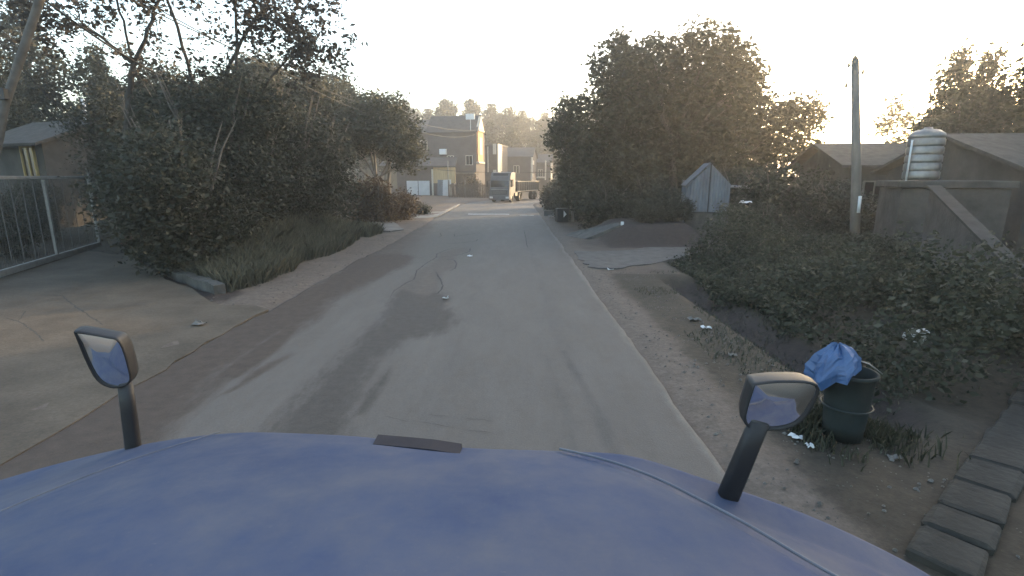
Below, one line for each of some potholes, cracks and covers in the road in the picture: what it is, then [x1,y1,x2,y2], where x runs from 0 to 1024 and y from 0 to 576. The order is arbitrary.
crack [5,311,44,341]
crack [44,294,103,325]
